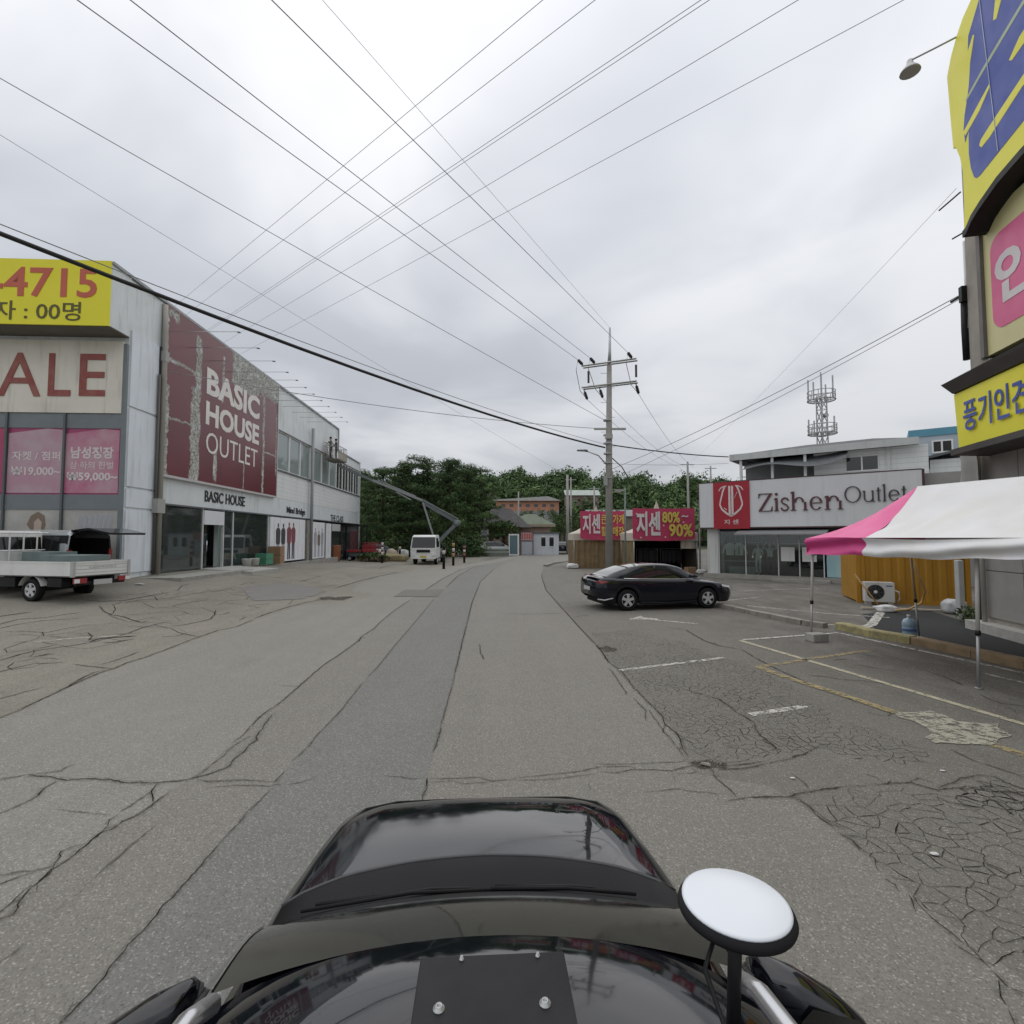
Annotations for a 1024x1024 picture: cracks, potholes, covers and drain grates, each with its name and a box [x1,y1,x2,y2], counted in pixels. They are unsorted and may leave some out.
crack [2,600,433,1024]
crack [0,566,404,718]
pothole [679,752,748,774]
crack [385,628,1024,1024]
